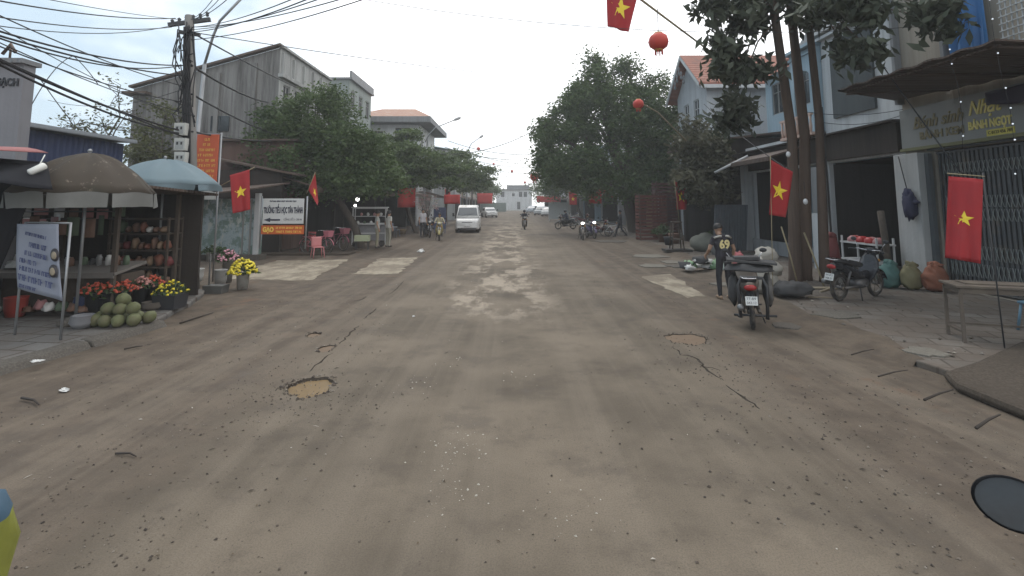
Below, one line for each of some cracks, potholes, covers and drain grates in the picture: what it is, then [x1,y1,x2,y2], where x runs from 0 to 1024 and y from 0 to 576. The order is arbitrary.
pothole [286,377,334,398]
crack [677,350,759,409]
crack [310,283,401,371]
pothole [664,334,707,345]
